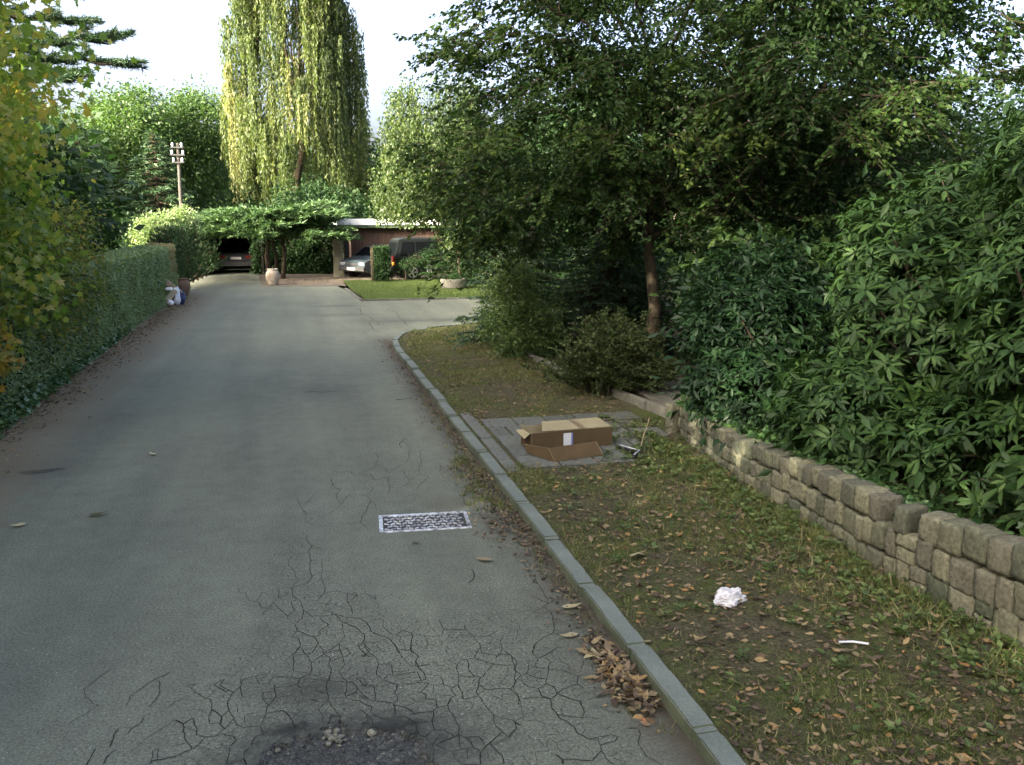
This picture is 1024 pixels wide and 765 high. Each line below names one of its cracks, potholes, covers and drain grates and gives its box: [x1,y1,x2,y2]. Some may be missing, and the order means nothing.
crack [86,536,659,765]
pothole [255,720,439,765]
